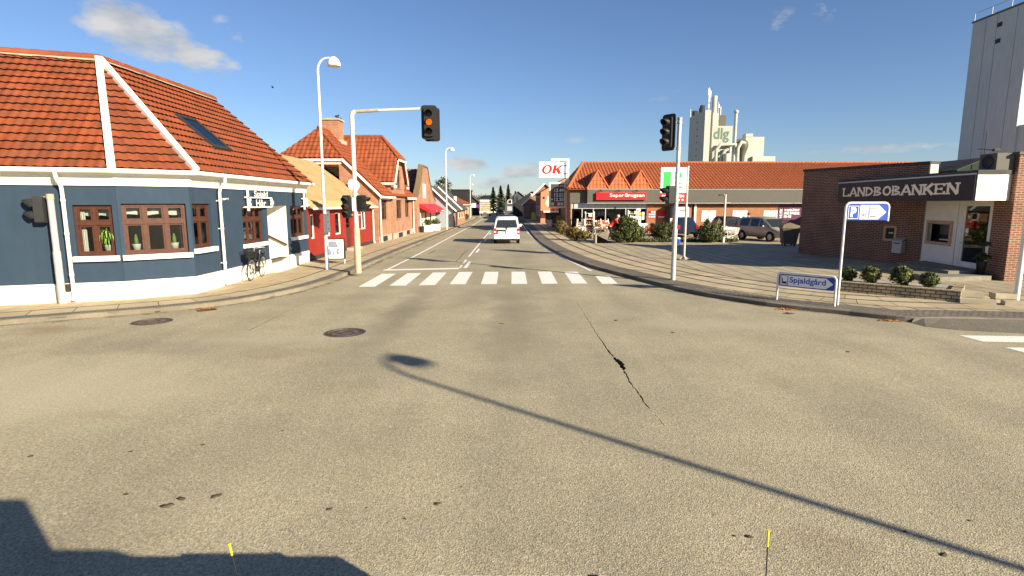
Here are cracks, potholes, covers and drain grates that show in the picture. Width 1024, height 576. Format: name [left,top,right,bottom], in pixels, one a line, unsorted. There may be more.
manhole cover [130,318,174,326]
crack [581,308,664,425]
manhole cover [323,328,366,337]
